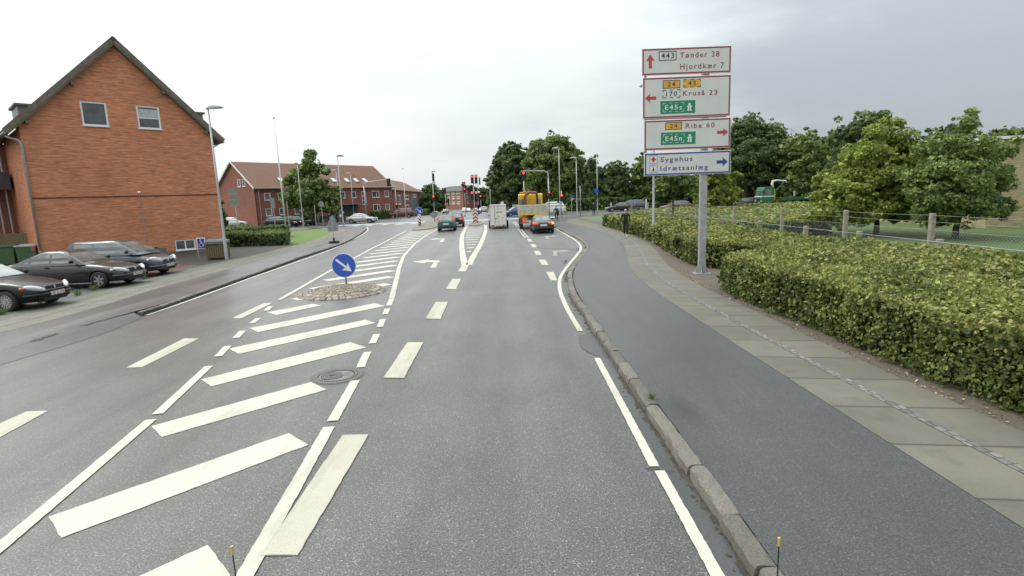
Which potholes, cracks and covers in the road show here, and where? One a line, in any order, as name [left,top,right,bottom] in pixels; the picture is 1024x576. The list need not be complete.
manhole cover [309,367,366,385]
